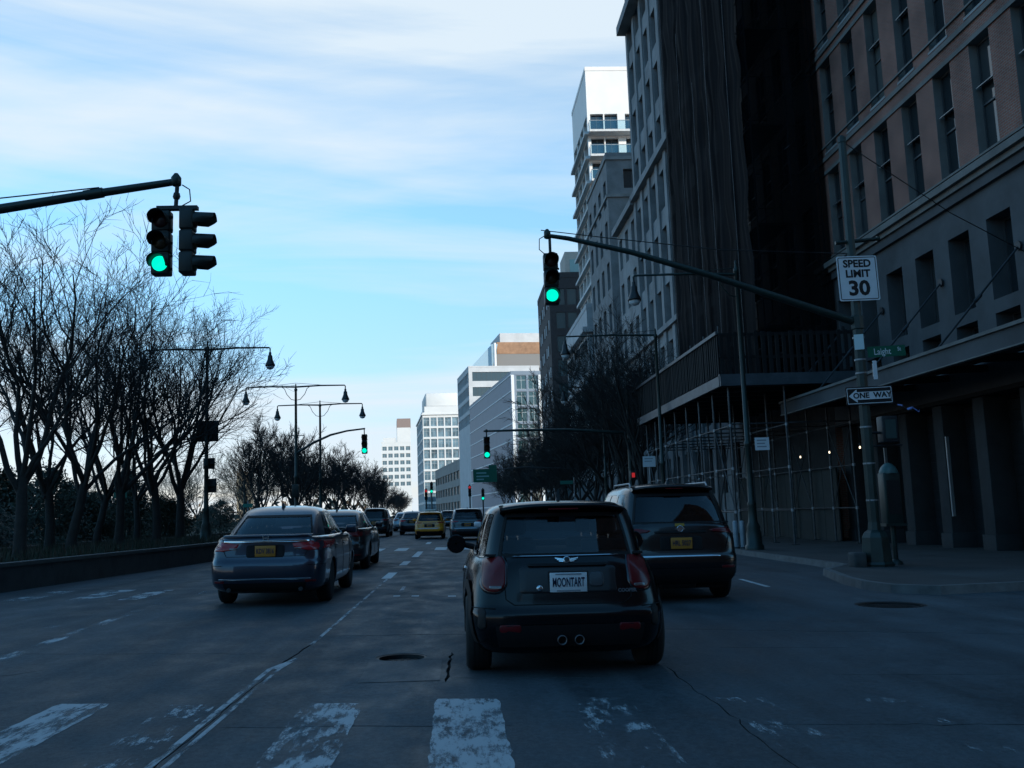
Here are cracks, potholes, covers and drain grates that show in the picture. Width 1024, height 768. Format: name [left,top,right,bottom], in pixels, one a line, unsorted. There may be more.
crack [445,653,454,682]
crack [670,669,797,767]
